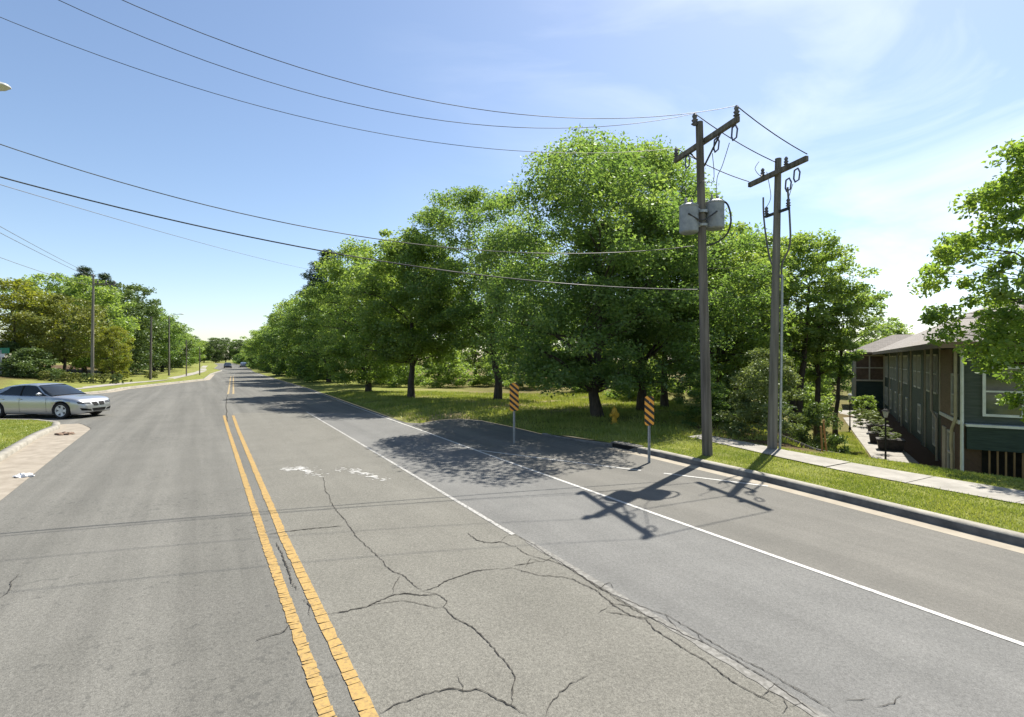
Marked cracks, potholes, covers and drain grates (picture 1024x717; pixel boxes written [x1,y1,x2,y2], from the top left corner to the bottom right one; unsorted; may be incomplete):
crack [271,478,833,715]
